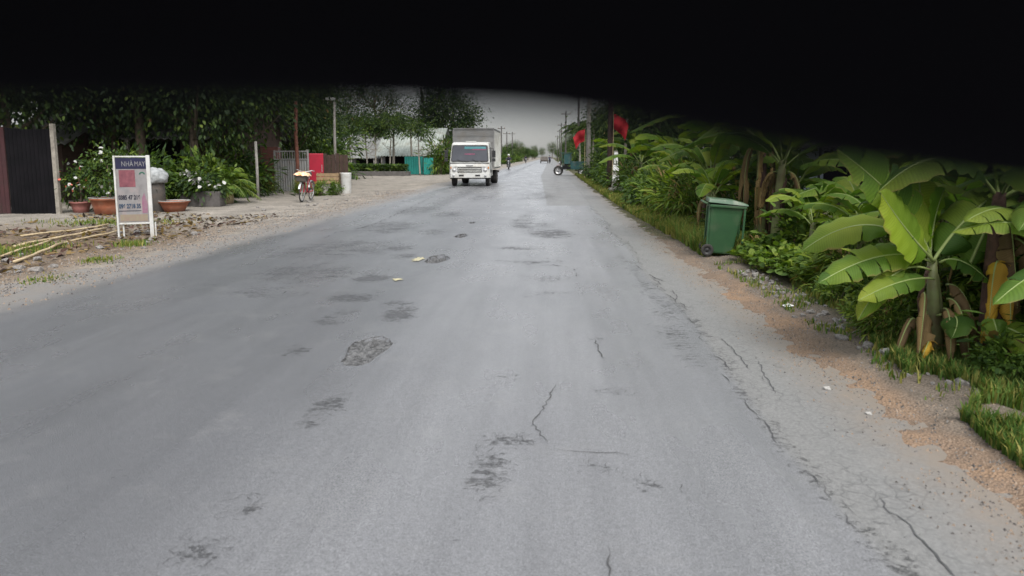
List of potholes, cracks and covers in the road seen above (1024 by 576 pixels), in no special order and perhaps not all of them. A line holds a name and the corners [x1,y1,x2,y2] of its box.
crack [879,496,955,576]
pothole [423,254,451,264]
crack [473,385,682,501]
pothole [339,335,395,368]
crack [720,337,776,393]
